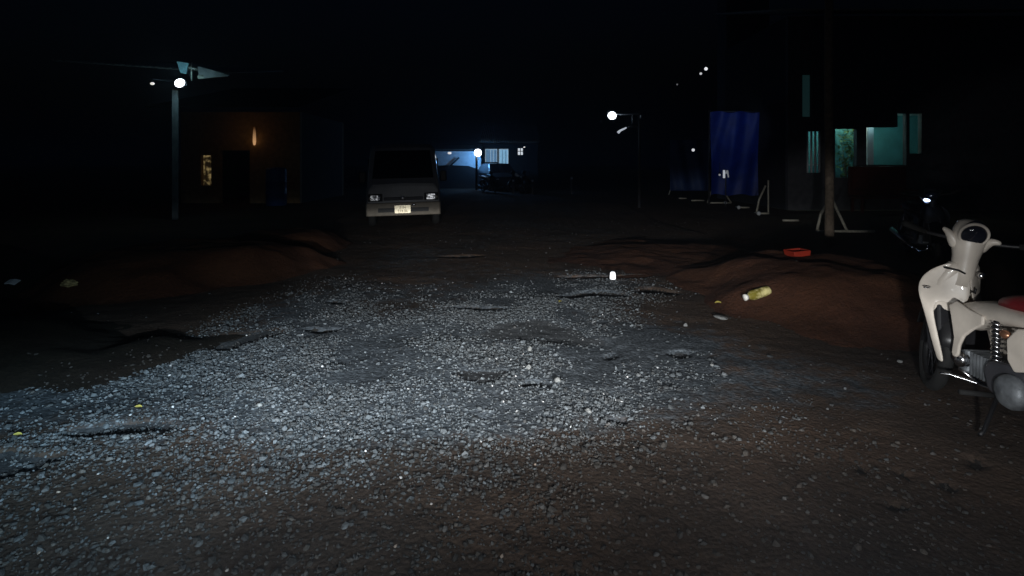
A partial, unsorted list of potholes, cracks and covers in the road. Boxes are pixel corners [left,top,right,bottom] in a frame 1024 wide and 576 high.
pothole [215,331,283,351]
pothole [562,291,626,299]
pothole [456,370,507,384]
pothole [65,422,174,438]
